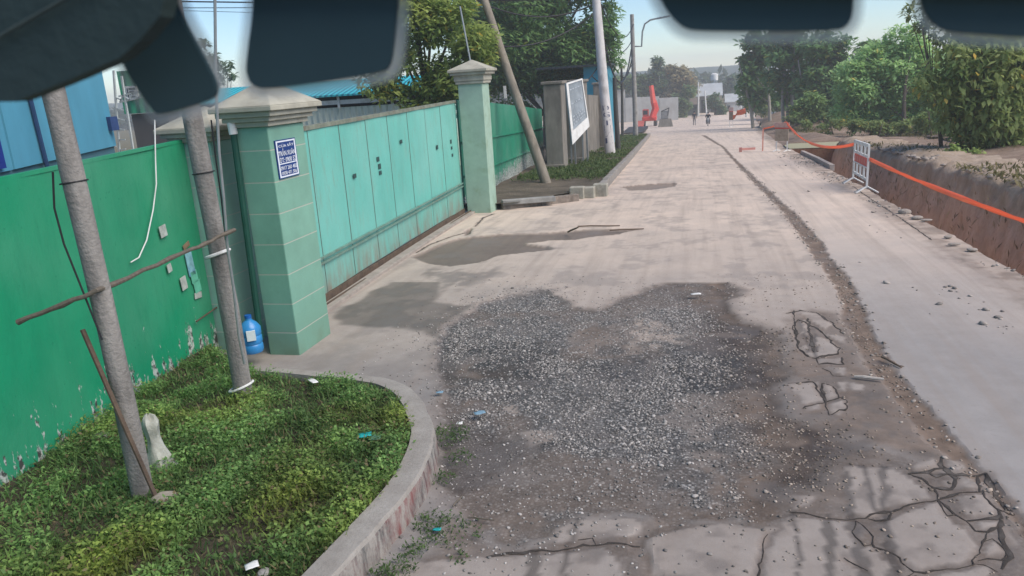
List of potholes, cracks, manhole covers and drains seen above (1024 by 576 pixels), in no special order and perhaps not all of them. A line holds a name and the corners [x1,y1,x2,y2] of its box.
crack [789,310,848,415]
crack [792,457,1015,576]
pothole [429,283,882,552]
